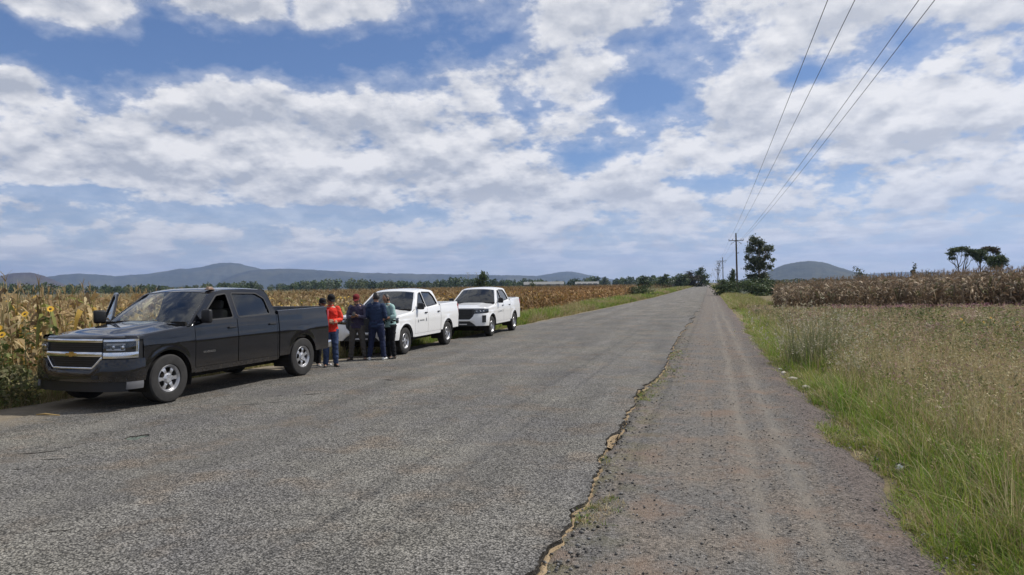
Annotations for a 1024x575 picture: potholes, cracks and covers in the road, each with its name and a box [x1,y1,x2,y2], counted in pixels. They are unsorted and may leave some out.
crack [531,323,692,575]
